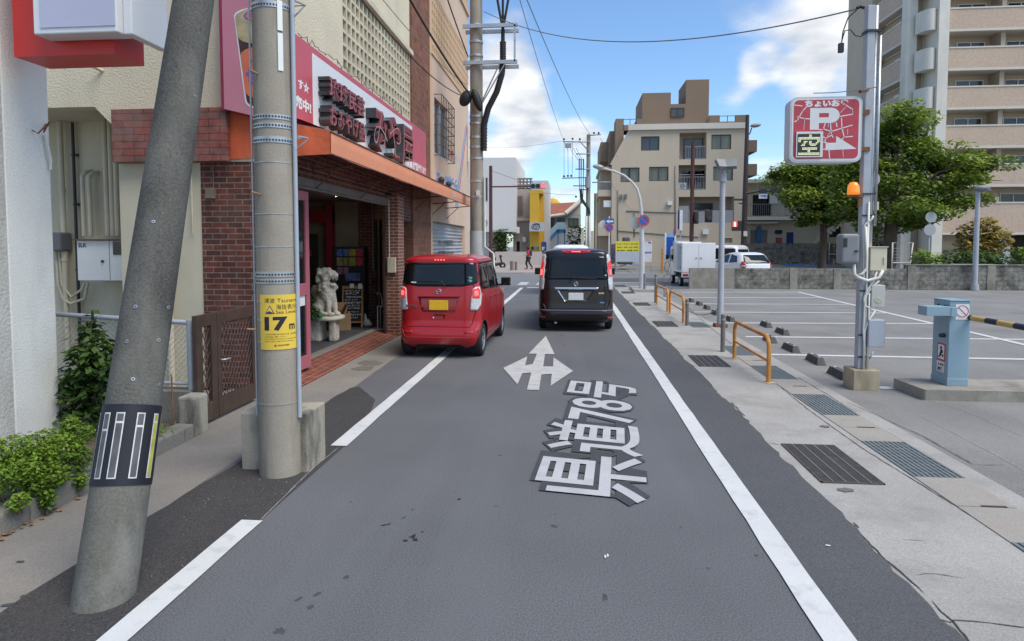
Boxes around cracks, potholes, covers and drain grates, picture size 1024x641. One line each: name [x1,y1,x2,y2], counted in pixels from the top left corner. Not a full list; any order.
drain grate [688,355,731,367]
crack [853,522,1022,641]
drain grate [861,441,965,478]
drain grate [781,443,885,485]
drain grate [750,365,798,379]
drain grate [792,394,860,416]
